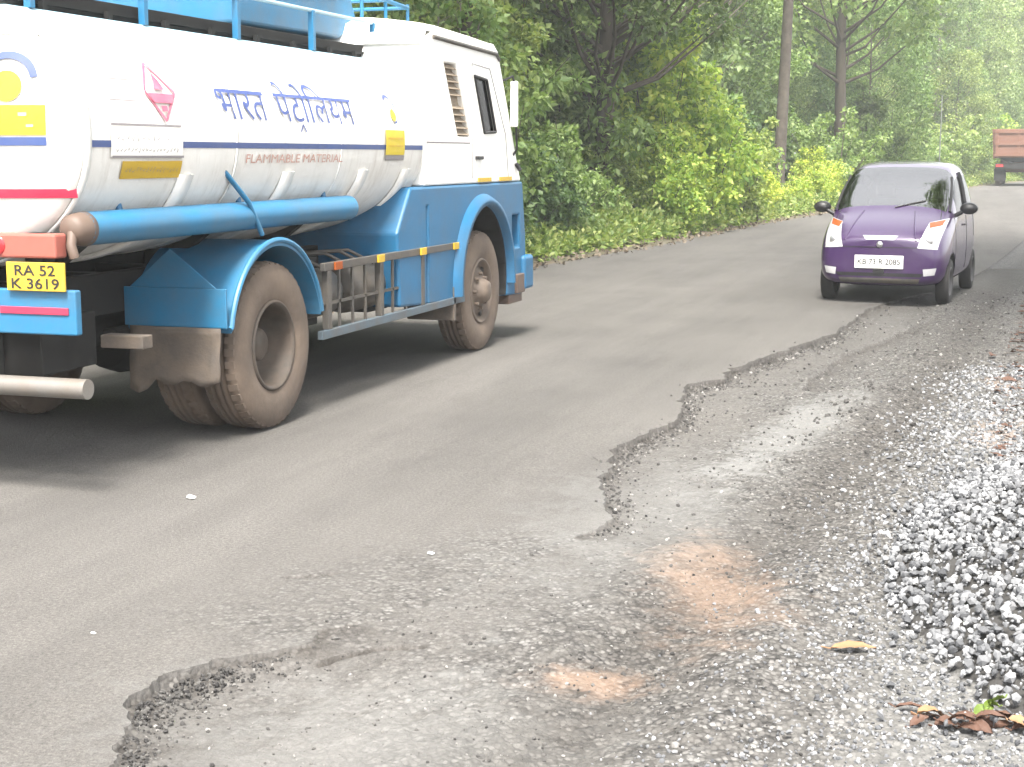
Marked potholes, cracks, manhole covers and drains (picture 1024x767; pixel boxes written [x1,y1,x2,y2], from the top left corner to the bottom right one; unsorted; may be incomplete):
pothole [580,395,794,540]
pothole [109,615,505,767]
pothole [683,308,942,403]
